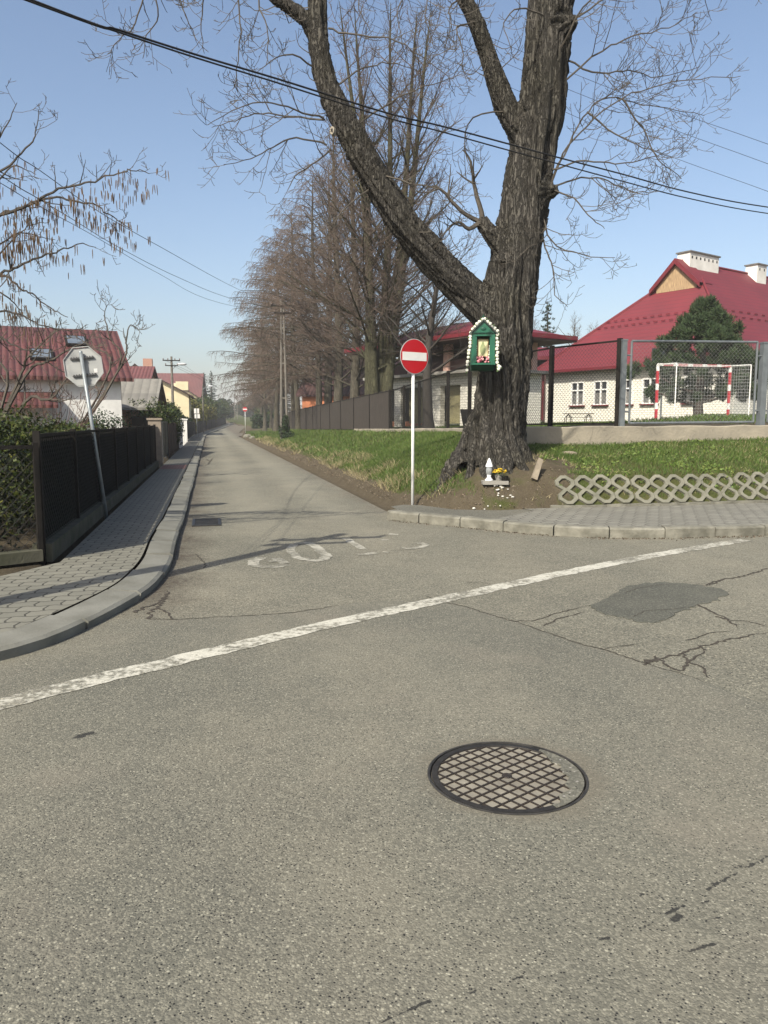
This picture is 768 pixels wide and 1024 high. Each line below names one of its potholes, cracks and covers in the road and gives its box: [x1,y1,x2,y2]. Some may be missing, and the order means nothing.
manhole cover [427,741,589,815]
crack [427,596,765,680]
crack [133,590,342,620]
crack [703,568,768,586]
drain grate [192,518,221,527]
